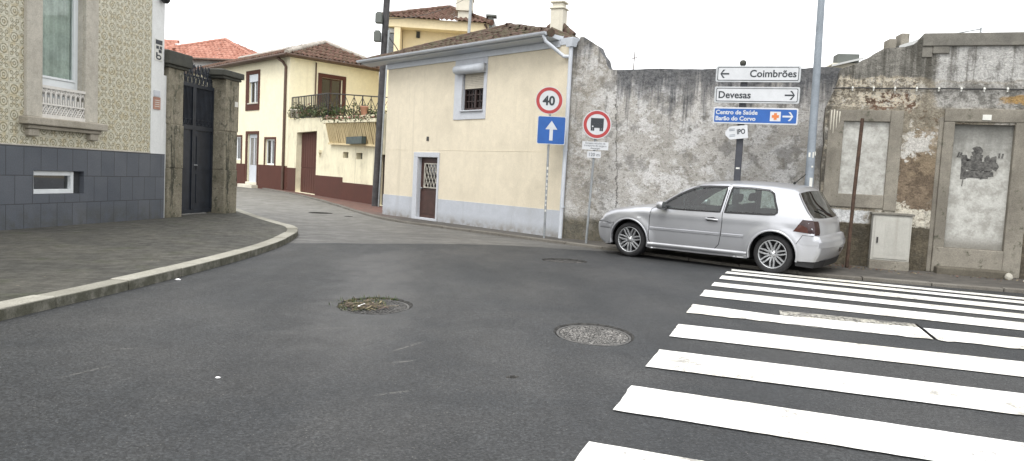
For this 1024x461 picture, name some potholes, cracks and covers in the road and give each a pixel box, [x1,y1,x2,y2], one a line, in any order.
manhole cover [336,297,413,315]
manhole cover [553,323,635,346]
